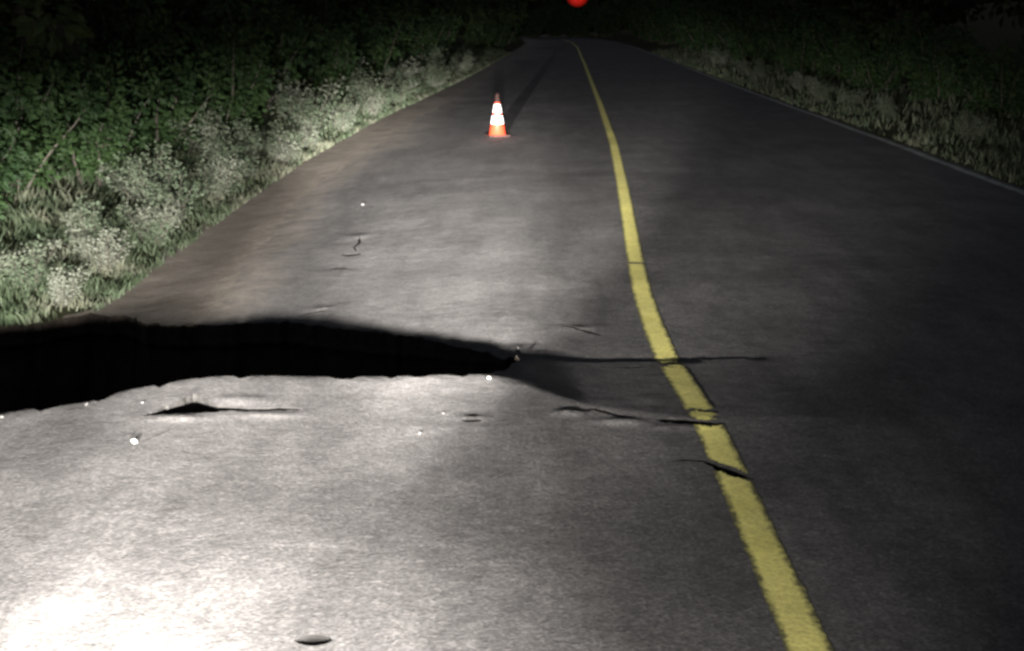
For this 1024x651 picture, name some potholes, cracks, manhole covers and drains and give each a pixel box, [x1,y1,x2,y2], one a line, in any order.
crack [563,407,629,417]
crack [653,417,726,426]
crack [557,325,605,337]
crack [672,458,754,479]
pothole [294,635,333,646]
